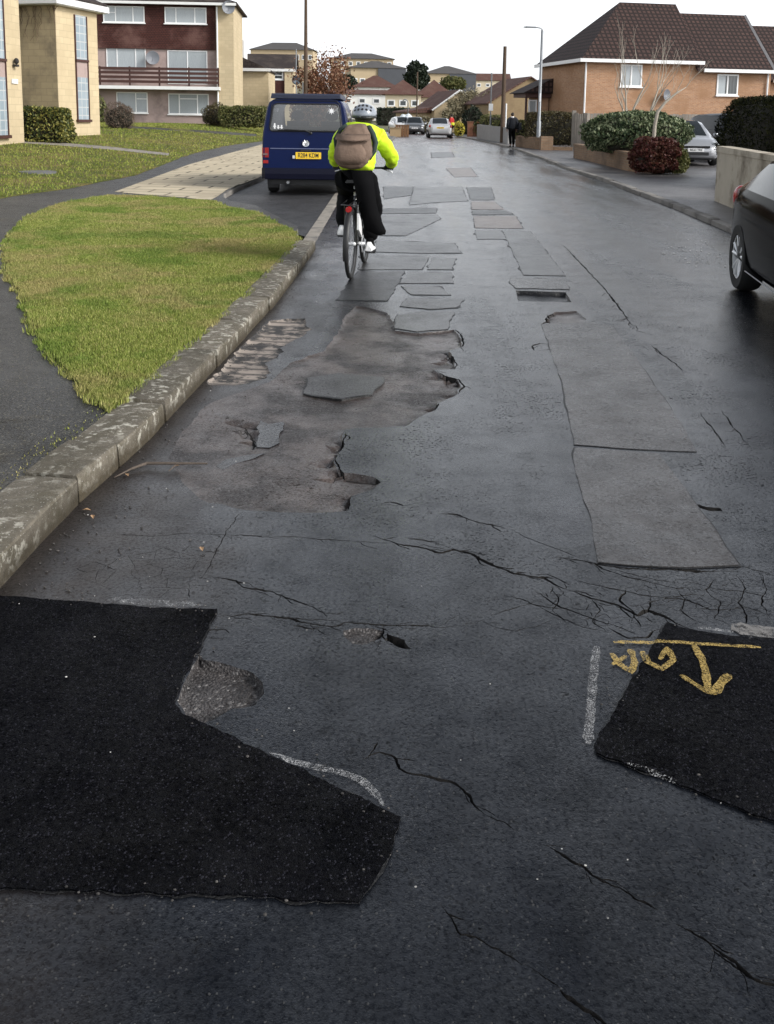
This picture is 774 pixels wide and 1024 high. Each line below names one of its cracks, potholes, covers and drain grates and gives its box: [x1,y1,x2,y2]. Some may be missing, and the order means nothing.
crack [440,904,606,1024]
pothole [386,633,410,649]
crack [562,245,690,373]
crack [364,742,514,830]
pothole [516,290,571,302]
pothole [168,306,462,513]
crack [546,845,774,998]
crack [699,412,758,450]
crack [123,511,774,652]
pothole [178,655,264,723]
